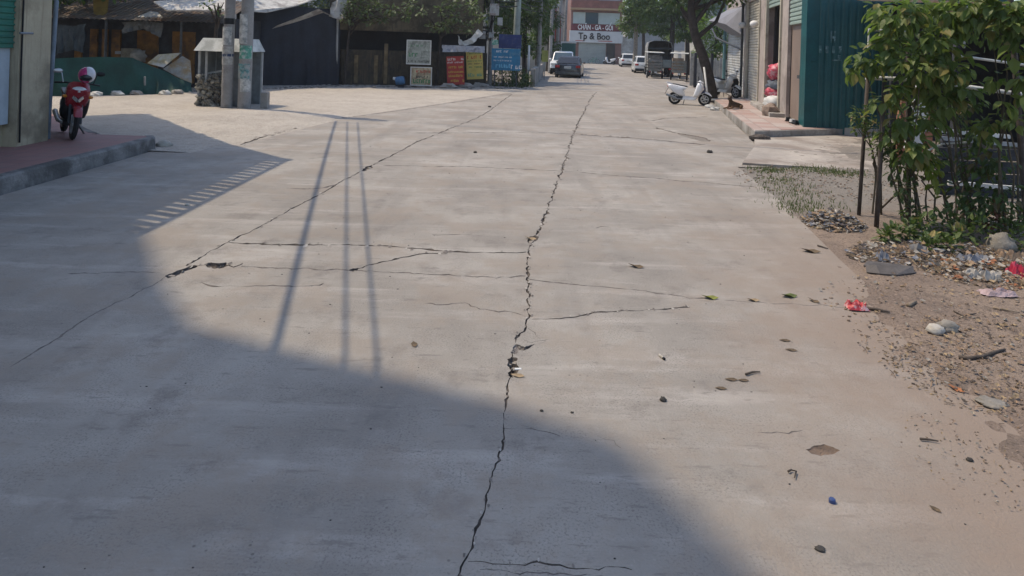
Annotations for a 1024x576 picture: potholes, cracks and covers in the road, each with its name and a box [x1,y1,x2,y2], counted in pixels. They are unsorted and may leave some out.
crack [458,477,632,576]
pothole [165,265,197,278]
crack [195,92,709,360]
